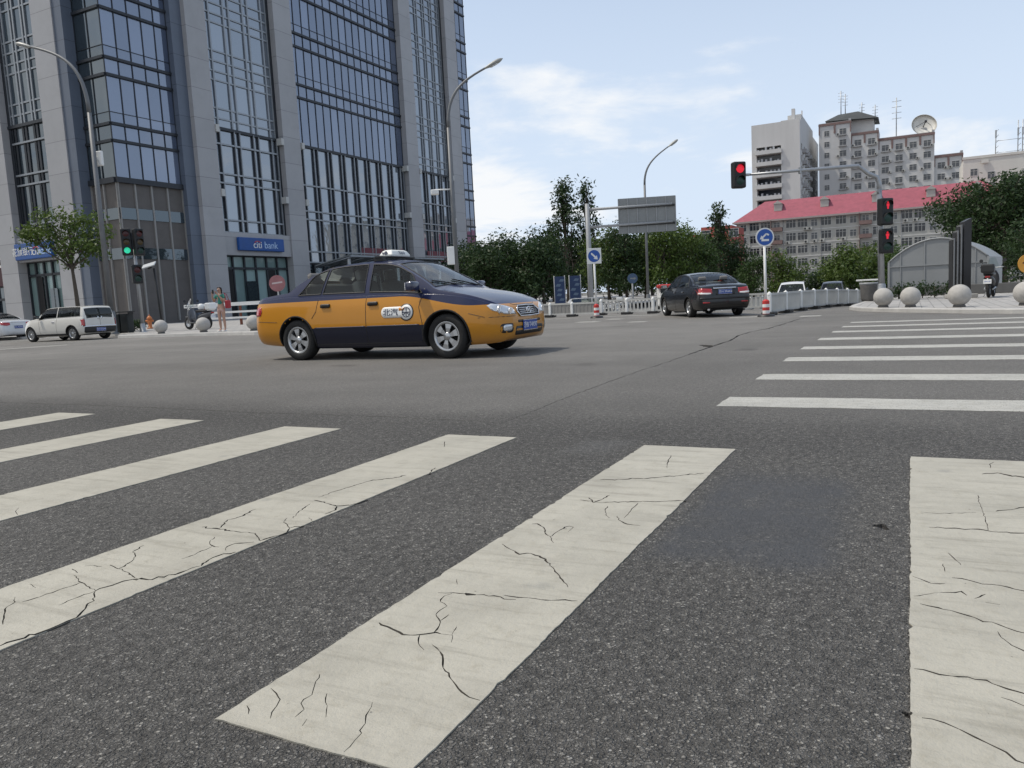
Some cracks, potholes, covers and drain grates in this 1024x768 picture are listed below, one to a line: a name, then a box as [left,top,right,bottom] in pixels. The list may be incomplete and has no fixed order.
crack [925,718,1024,764]
crack [918,555,1024,651]
crack [931,496,1024,534]
crack [0,475,405,646]
crack [500,317,806,424]
crack [583,457,704,525]
crack [379,524,571,700]
crack [919,669,1024,706]
